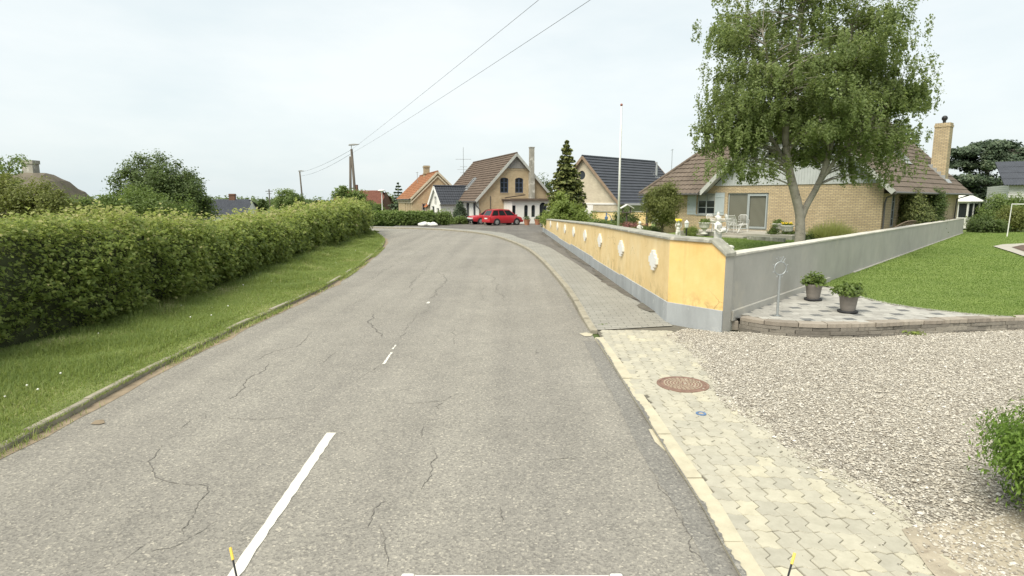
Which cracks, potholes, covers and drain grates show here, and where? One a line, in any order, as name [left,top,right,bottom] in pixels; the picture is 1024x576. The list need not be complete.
crack [115,446,209,566]
manhole cover [657,376,710,393]
